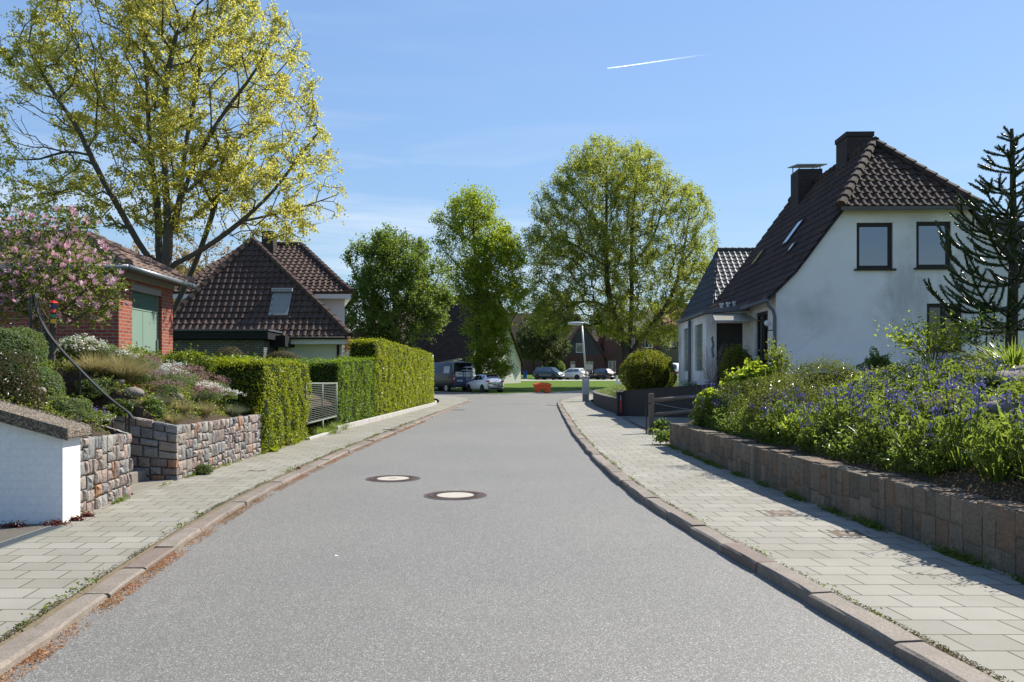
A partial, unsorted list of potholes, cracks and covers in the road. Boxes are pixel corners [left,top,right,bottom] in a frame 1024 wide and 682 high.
manhole cover [424,490,487,500]
